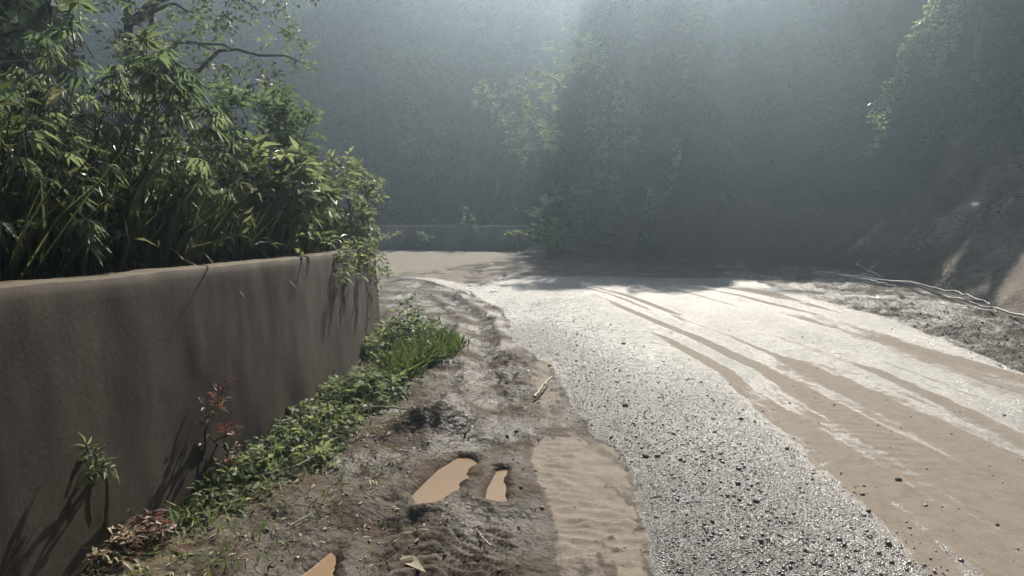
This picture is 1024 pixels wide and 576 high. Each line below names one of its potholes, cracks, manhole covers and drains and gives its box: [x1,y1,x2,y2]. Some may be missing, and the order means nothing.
pothole [396,450,489,510]
pothole [468,461,519,506]
